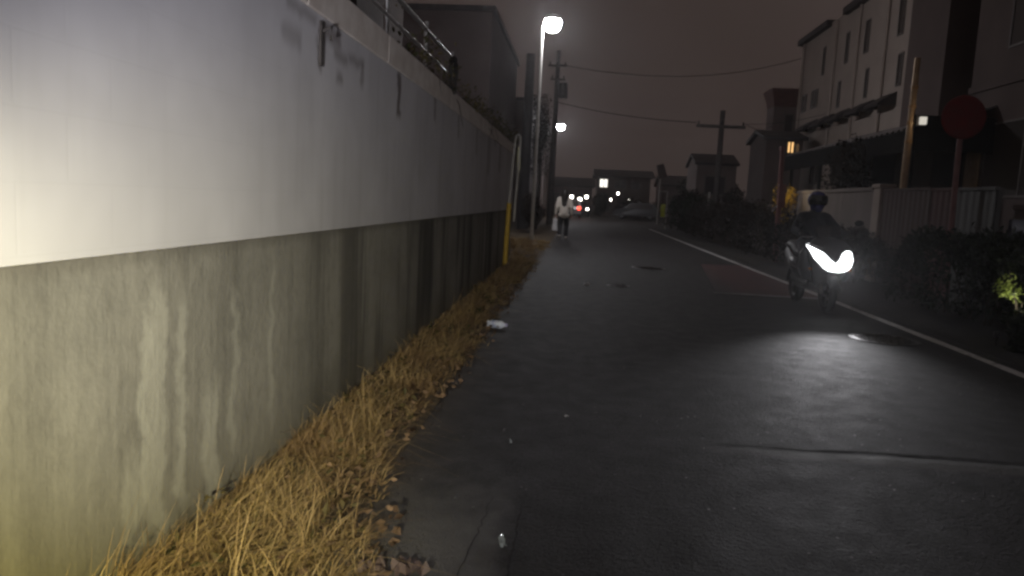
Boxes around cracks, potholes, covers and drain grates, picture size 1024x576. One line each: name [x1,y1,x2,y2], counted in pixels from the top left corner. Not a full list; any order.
manhole cover [848,333,922,346]
